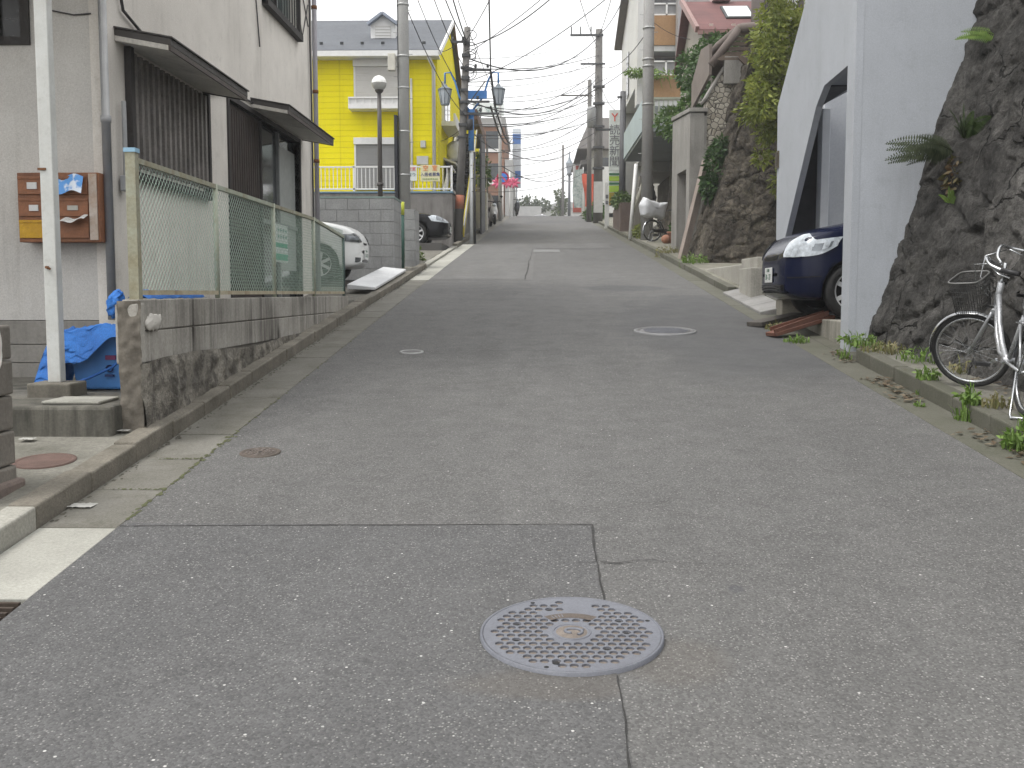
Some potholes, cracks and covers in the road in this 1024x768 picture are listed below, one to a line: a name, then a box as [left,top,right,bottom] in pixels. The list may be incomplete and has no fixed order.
manhole cover [480,597,664,677]
drain grate [0,602,21,621]
manhole cover [11,453,77,469]
manhole cover [634,326,696,336]
utility cover [239,447,281,458]
